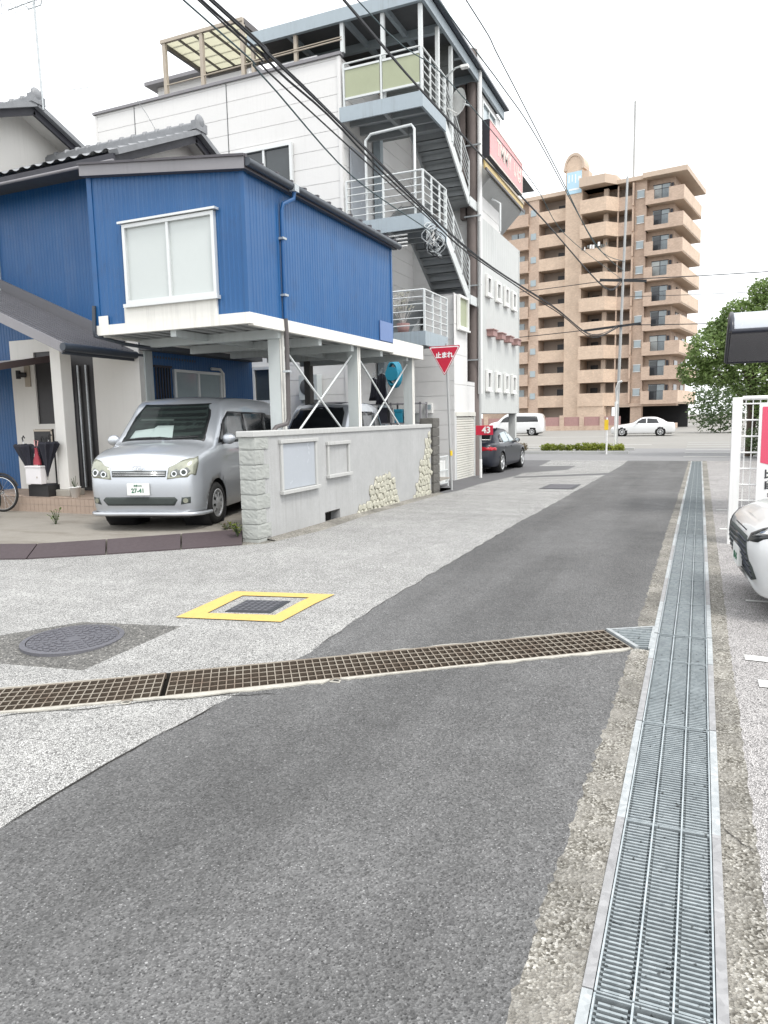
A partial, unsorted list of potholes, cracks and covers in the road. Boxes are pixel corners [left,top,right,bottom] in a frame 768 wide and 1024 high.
drain grate [654,601,712,639]
drain grate [165,630,633,696]
drain grate [665,560,709,581]
drain grate [617,720,721,841]
drain grate [677,516,706,528]
drain grate [669,545,708,562]
drain grate [660,578,710,605]
drain grate [0,673,167,711]
drain grate [606,626,656,650]
drain grate [648,633,713,667]
drain grate [636,658,716,732]
